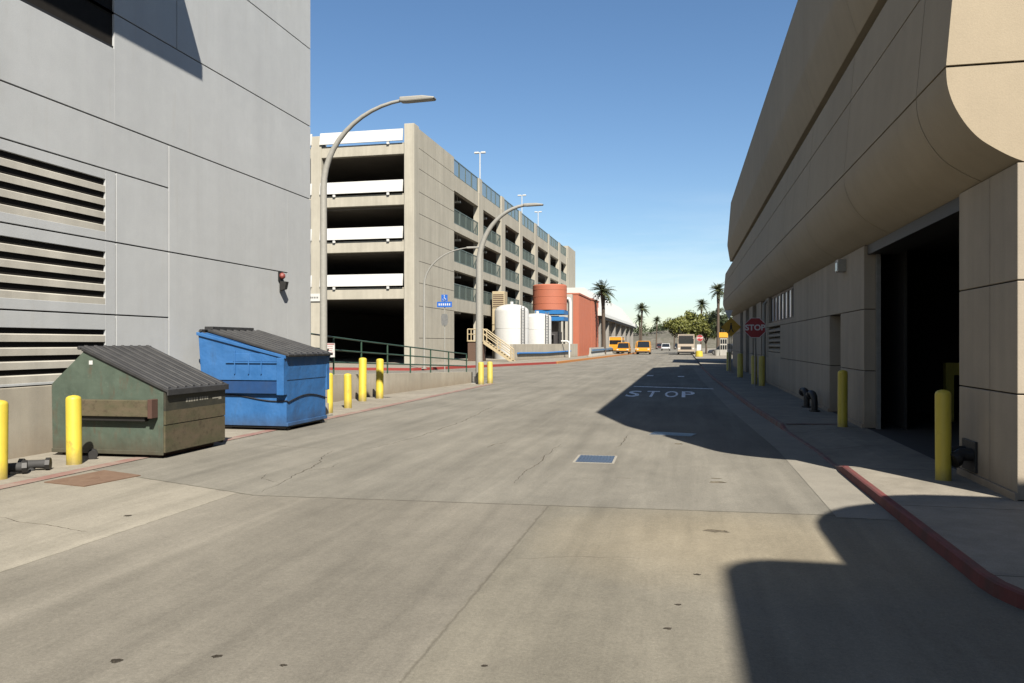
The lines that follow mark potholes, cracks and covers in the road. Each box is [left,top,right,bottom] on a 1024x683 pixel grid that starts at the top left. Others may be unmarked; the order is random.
drain grate [573,455,617,464]
